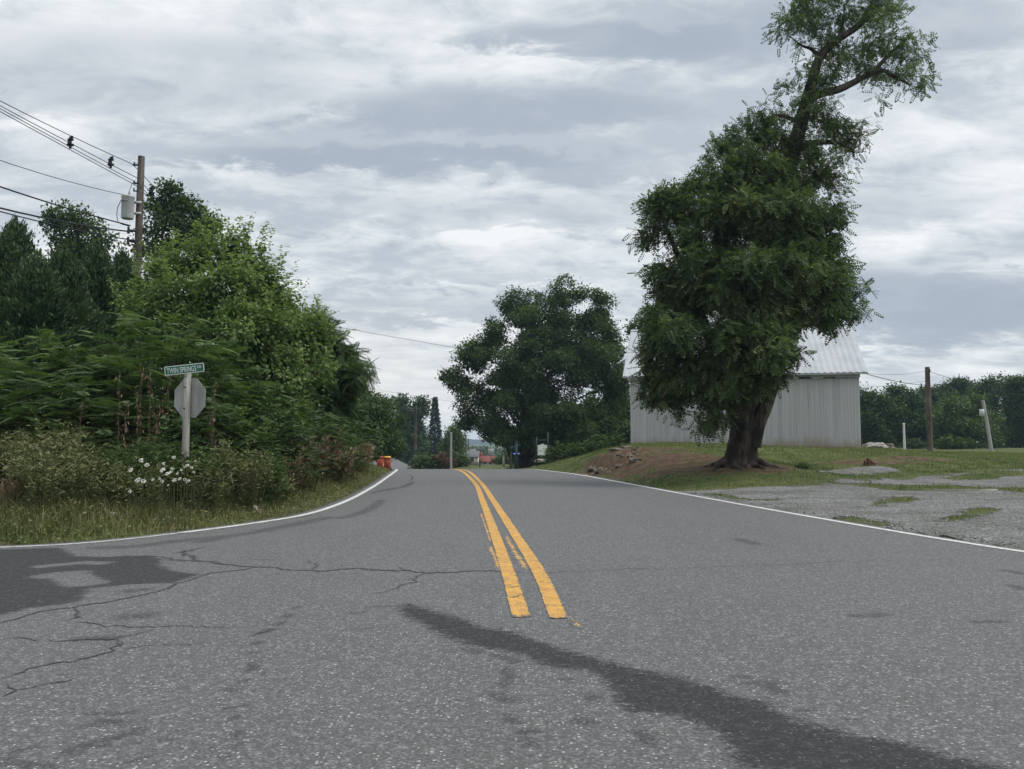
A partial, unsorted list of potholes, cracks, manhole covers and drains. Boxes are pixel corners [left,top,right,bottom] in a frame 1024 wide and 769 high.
crack [1,547,940,697]
